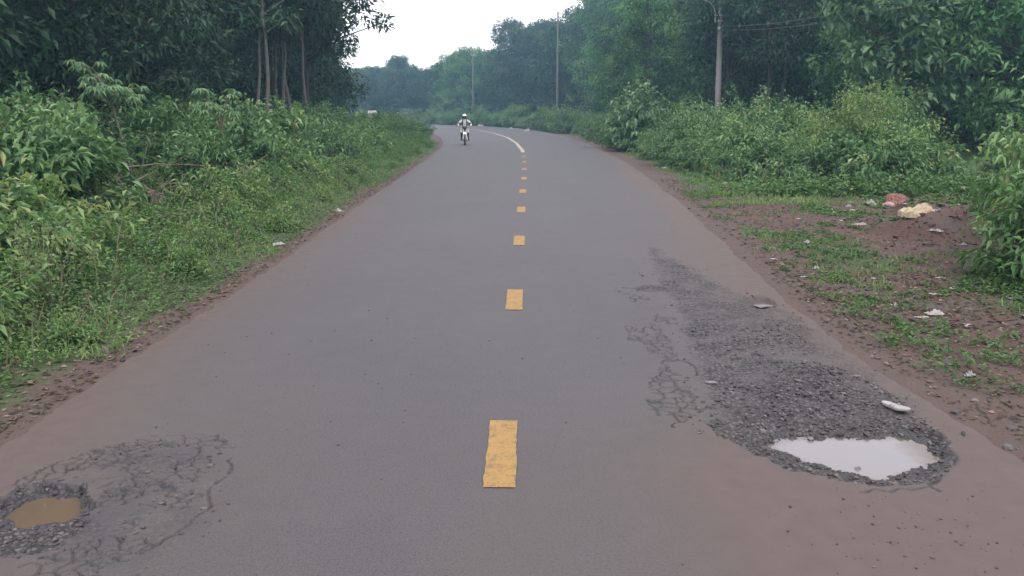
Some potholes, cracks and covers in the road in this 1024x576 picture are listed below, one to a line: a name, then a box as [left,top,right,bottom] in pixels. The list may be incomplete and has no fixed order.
crack [624,244,887,428]
crack [1,435,233,576]
pothole [0,477,100,558]
pothole [703,358,963,489]
